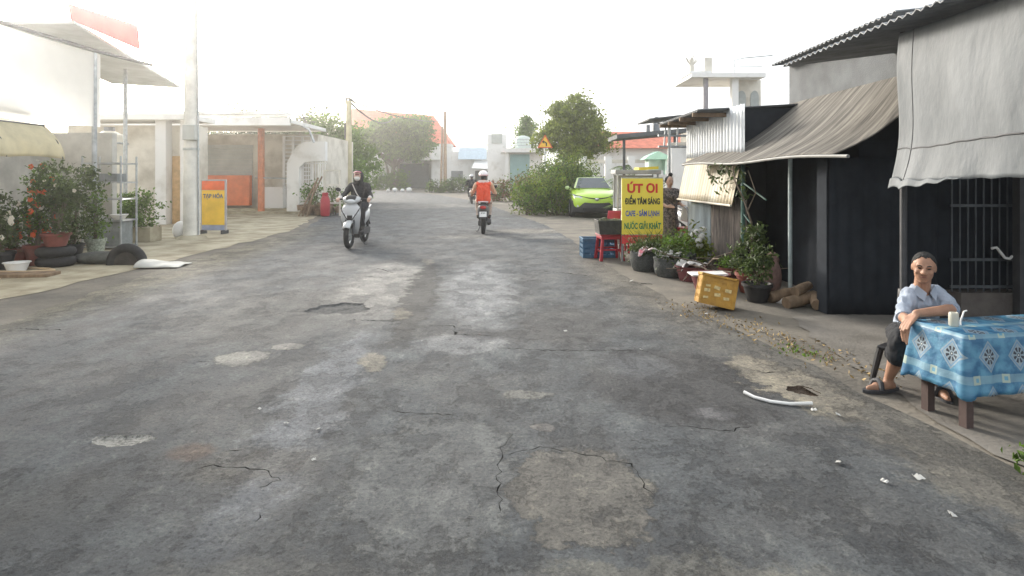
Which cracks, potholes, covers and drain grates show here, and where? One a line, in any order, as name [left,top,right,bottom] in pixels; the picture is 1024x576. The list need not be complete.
pothole [786,385,821,396]
crack [509,348,676,362]
pothole [304,302,370,315]
crack [496,435,655,512]
crack [199,449,281,520]
